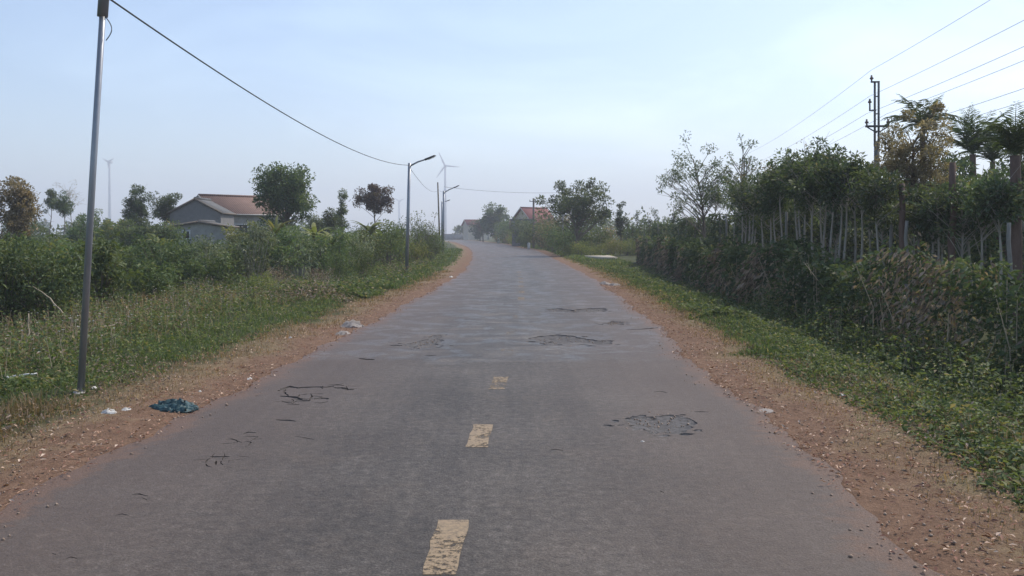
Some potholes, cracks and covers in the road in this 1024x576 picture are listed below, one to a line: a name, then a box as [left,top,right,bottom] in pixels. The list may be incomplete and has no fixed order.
pothole [389,334,451,350]
crack [278,383,354,440]
pothole [603,414,702,437]
crack [205,432,262,468]
pothole [526,335,621,346]
